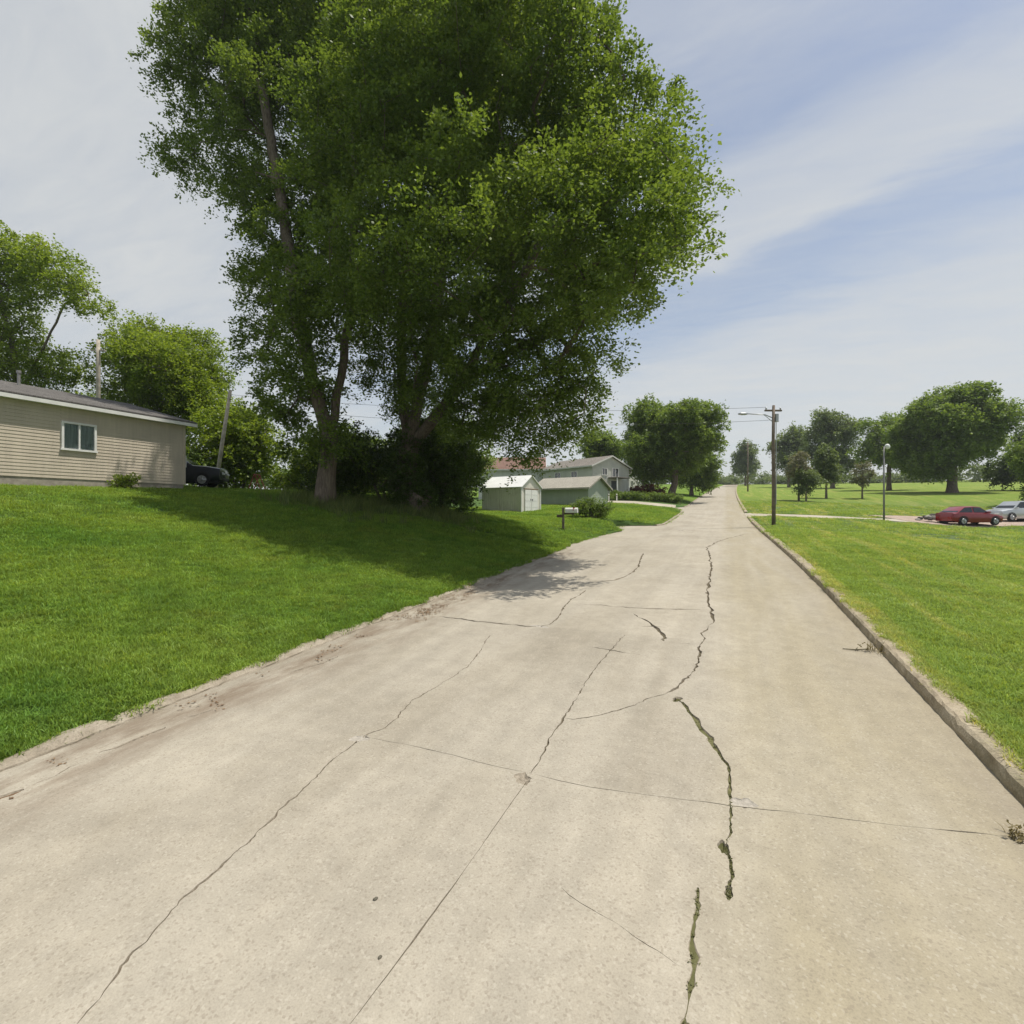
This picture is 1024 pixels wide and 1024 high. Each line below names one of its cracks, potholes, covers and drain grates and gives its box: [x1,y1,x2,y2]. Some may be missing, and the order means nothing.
crack [563,534,744,900]
crack [561,887,702,1024]
crack [77,591,585,1024]
